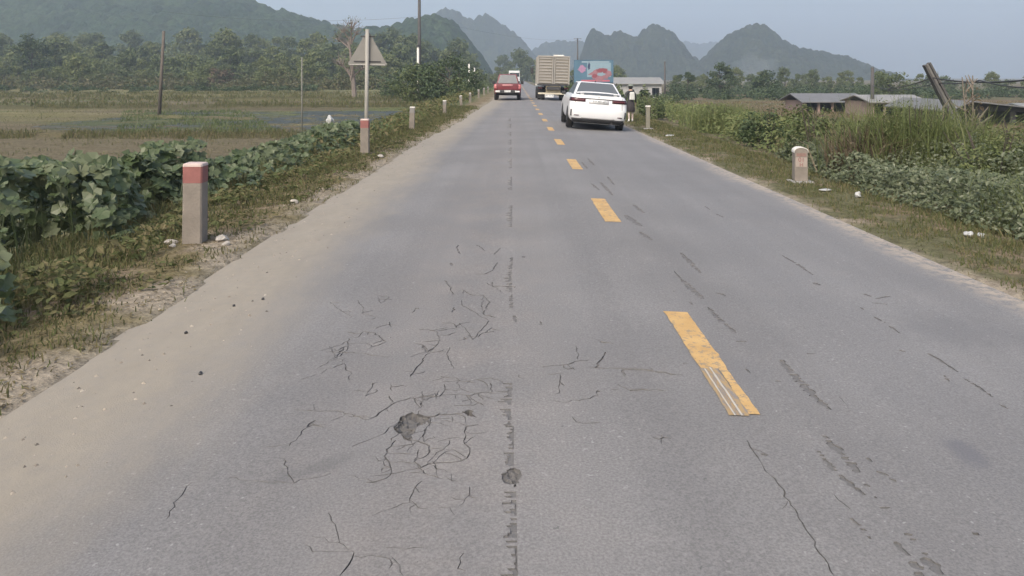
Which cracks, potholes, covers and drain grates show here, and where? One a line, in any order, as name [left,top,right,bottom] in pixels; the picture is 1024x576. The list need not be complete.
crack [229,245,508,575]
crack [543,339,685,424]
pothole [501,467,522,486]
crack [747,436,897,575]
pothole [395,412,429,441]
